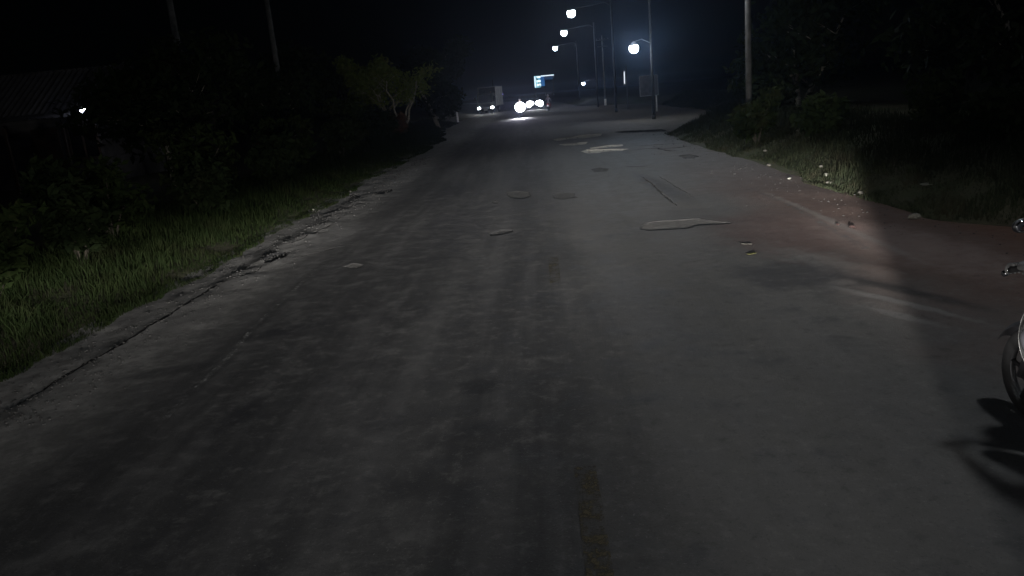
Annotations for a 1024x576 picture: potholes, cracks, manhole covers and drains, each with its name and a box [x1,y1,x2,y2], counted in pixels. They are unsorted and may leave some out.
crack [625,143,695,206]
crack [7,266,262,410]
